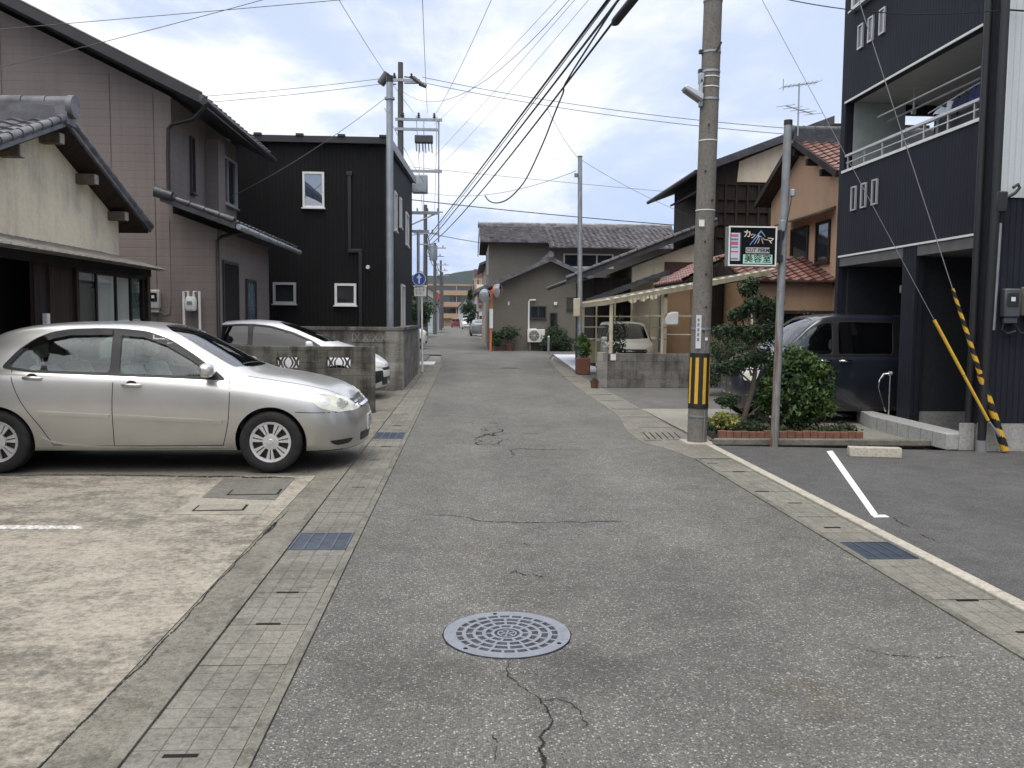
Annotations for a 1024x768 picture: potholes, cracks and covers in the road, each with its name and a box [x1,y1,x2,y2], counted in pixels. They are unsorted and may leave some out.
manhole cover [442,612,572,659]
drain grate [288,532,354,550]
crack [467,422,561,457]
crack [416,514,626,523]
crack [506,661,588,768]
drain grate [840,542,919,559]
